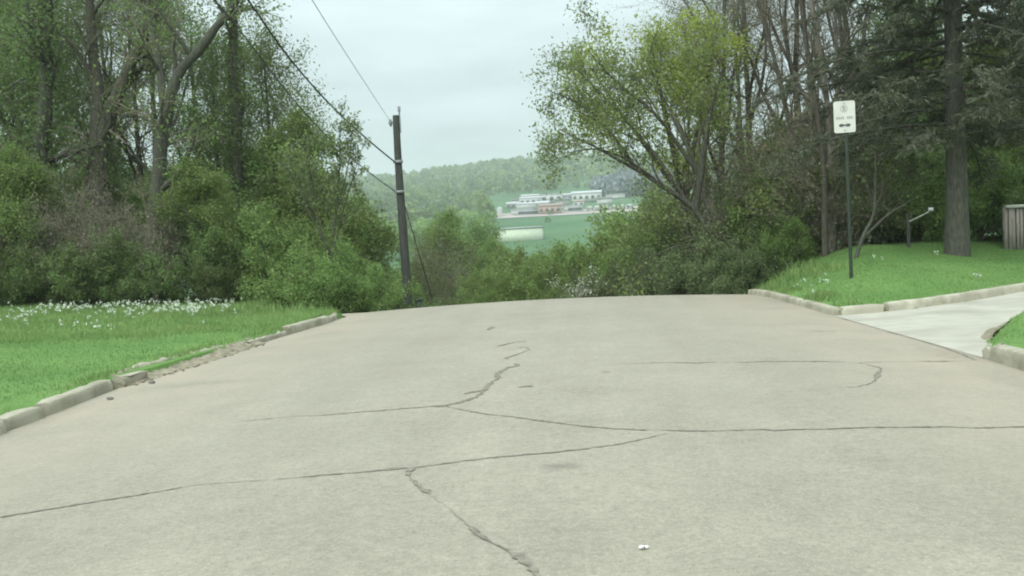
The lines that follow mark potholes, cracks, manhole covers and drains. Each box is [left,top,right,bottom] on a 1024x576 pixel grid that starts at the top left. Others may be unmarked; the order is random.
crack [0,327,1024,576]
